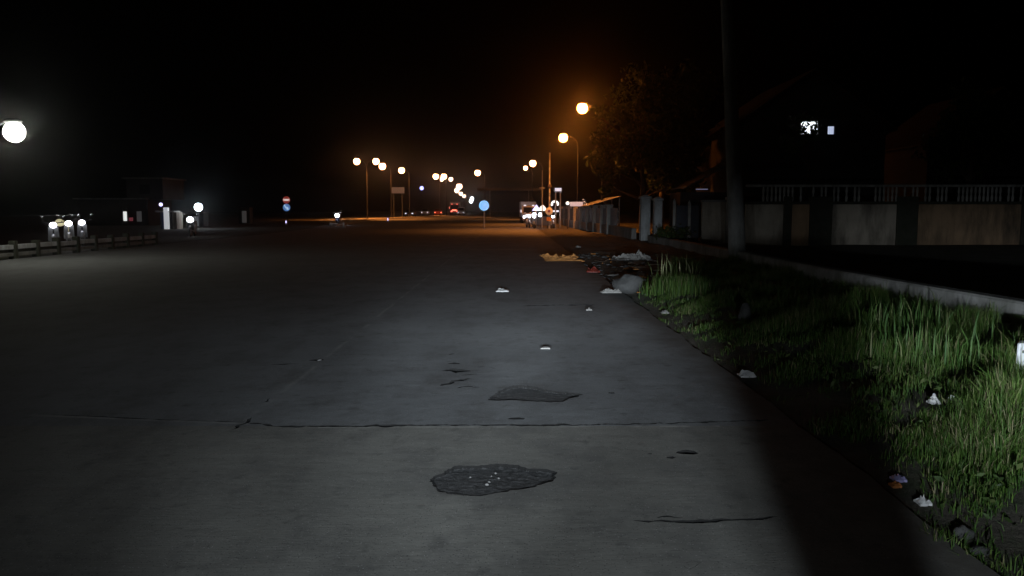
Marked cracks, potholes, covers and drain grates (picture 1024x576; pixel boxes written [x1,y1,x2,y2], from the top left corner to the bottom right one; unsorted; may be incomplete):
crack [634,515,777,523]
crack [440,353,482,388]
